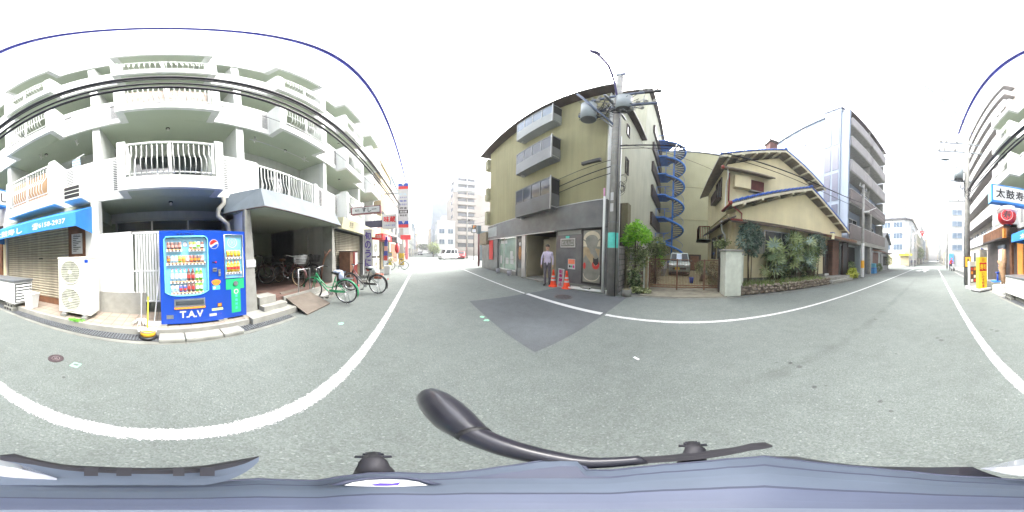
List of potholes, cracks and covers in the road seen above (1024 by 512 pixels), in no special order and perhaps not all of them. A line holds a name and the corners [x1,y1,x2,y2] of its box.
manhole cover [48,354,64,362]
